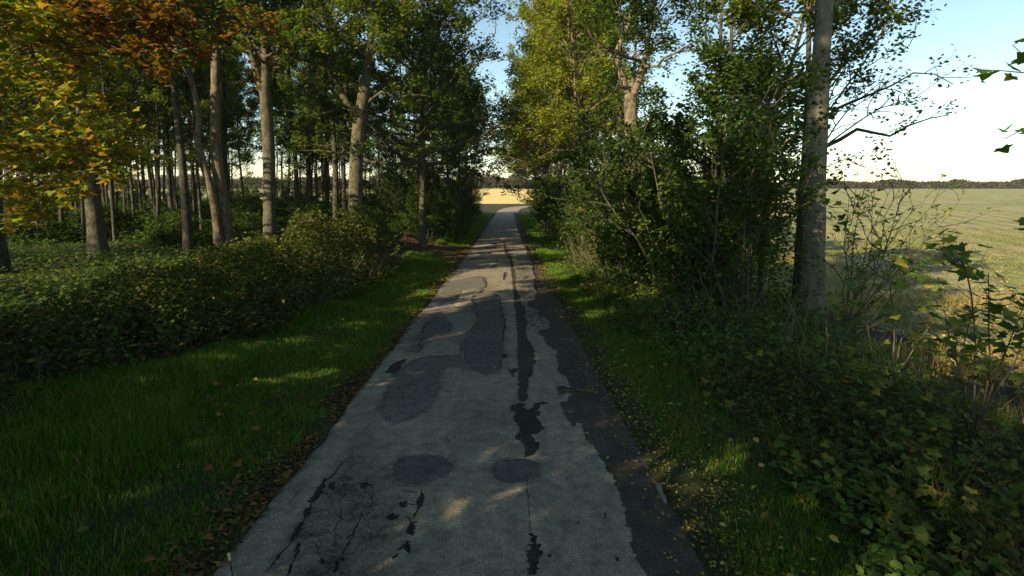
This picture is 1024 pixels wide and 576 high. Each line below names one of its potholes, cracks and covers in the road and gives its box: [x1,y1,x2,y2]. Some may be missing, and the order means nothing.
crack [267,462,374,576]
